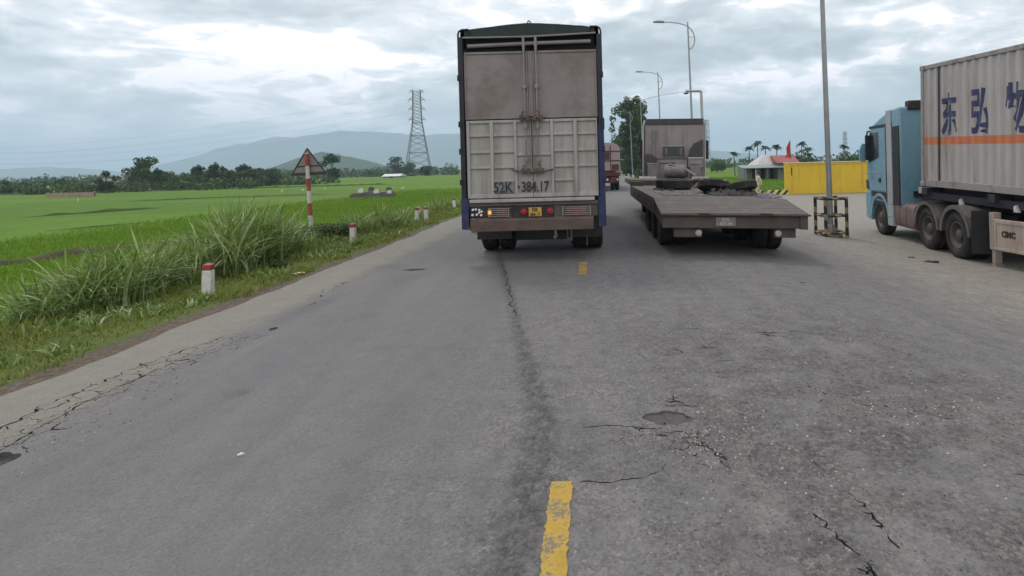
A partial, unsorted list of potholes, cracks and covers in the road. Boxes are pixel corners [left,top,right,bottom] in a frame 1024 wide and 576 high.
pothole [0,452,21,466]
crack [583,396,750,469]
crack [494,263,517,316]
crack [579,467,664,483]
crack [813,492,900,576]
crack [0,333,269,452]
pothole [642,411,693,425]
